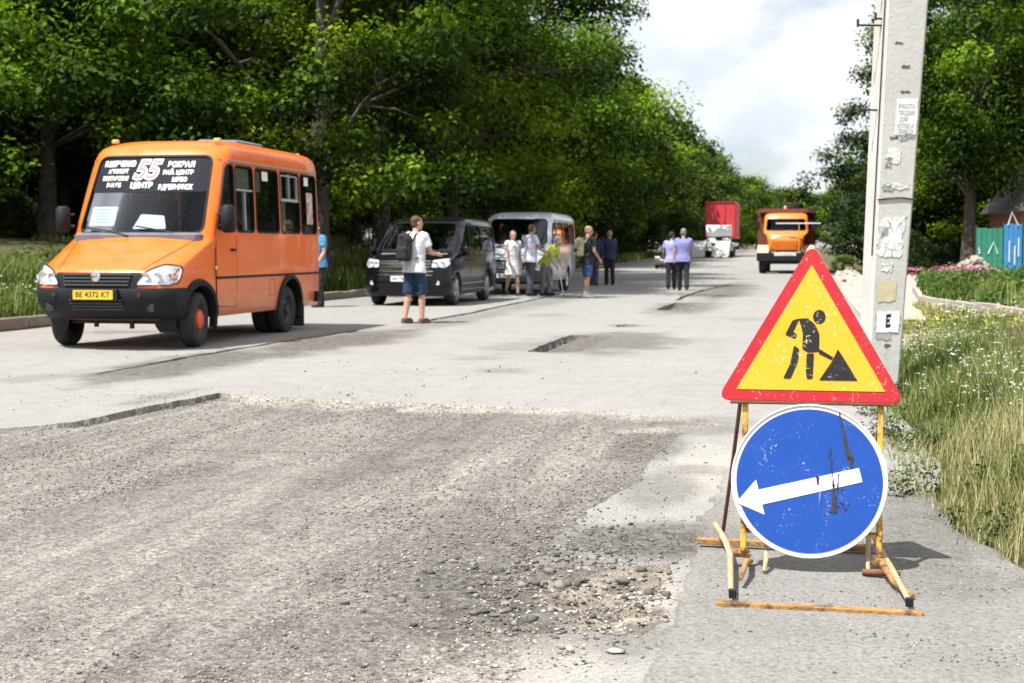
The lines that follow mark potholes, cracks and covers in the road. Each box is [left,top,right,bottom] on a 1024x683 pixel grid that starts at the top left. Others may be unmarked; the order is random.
pothole [528,335,611,353]
pothole [524,564,672,637]
